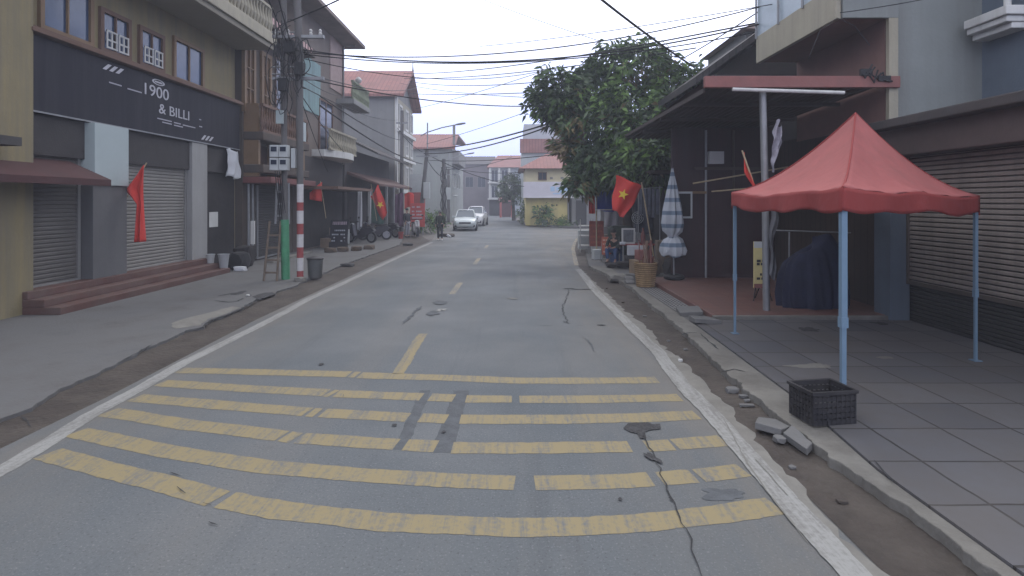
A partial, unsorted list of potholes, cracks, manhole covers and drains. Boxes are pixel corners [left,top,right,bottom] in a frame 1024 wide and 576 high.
crack [643,432,702,576]
drain grate [642,288,688,311]
crack [562,288,602,351]
pothole [624,422,661,438]
